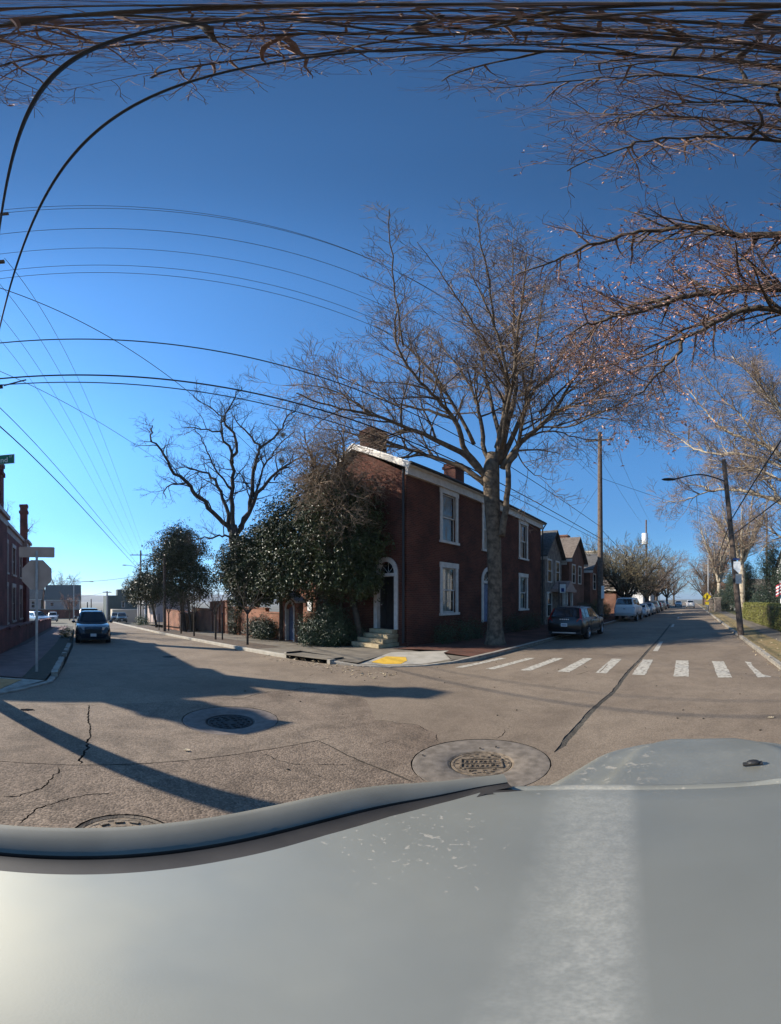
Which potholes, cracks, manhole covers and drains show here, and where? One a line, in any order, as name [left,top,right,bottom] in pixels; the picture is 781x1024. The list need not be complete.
manhole cover [182,706,278,735]
manhole cover [411,739,552,786]
drain grate [284,651,344,664]
manhole cover [75,814,164,828]
crack [63,704,103,765]
crack [1,768,117,823]
